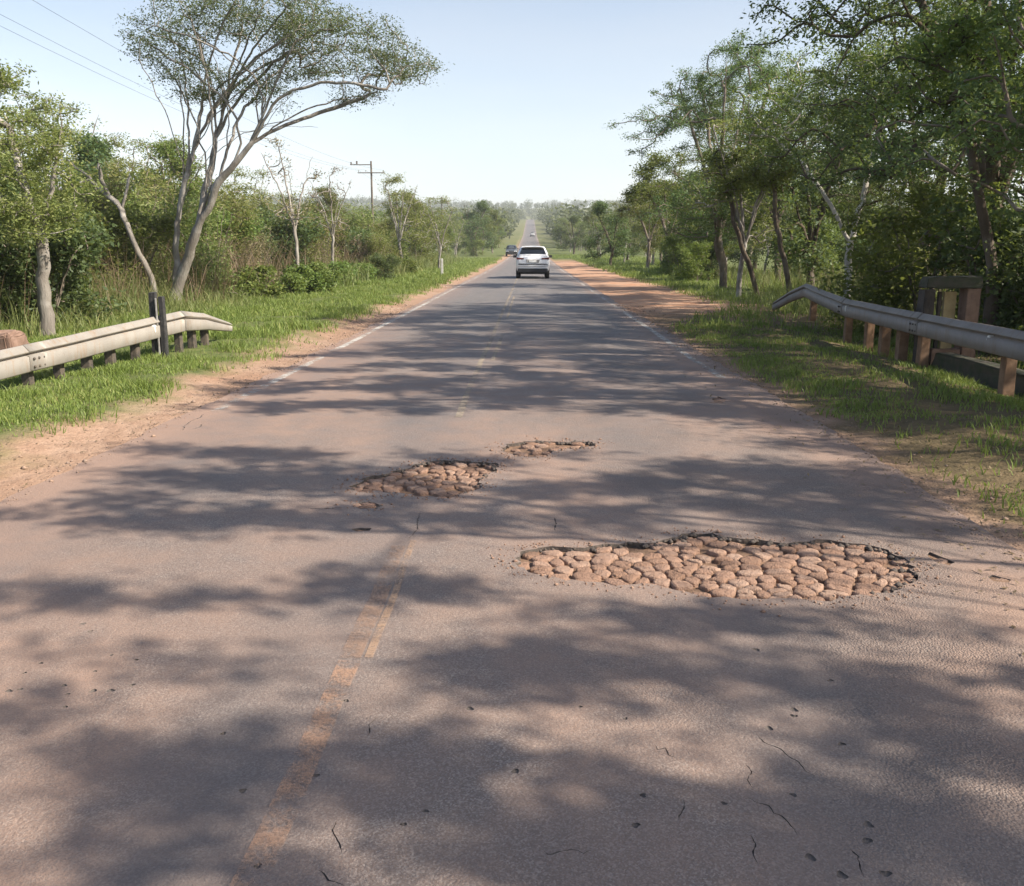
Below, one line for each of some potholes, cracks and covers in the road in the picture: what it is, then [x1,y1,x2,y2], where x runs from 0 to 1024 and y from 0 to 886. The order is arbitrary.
crack [747,766,797,834]
pothole [485,437,612,461]
pothole [332,455,514,502]
pothole [487,527,952,617]
